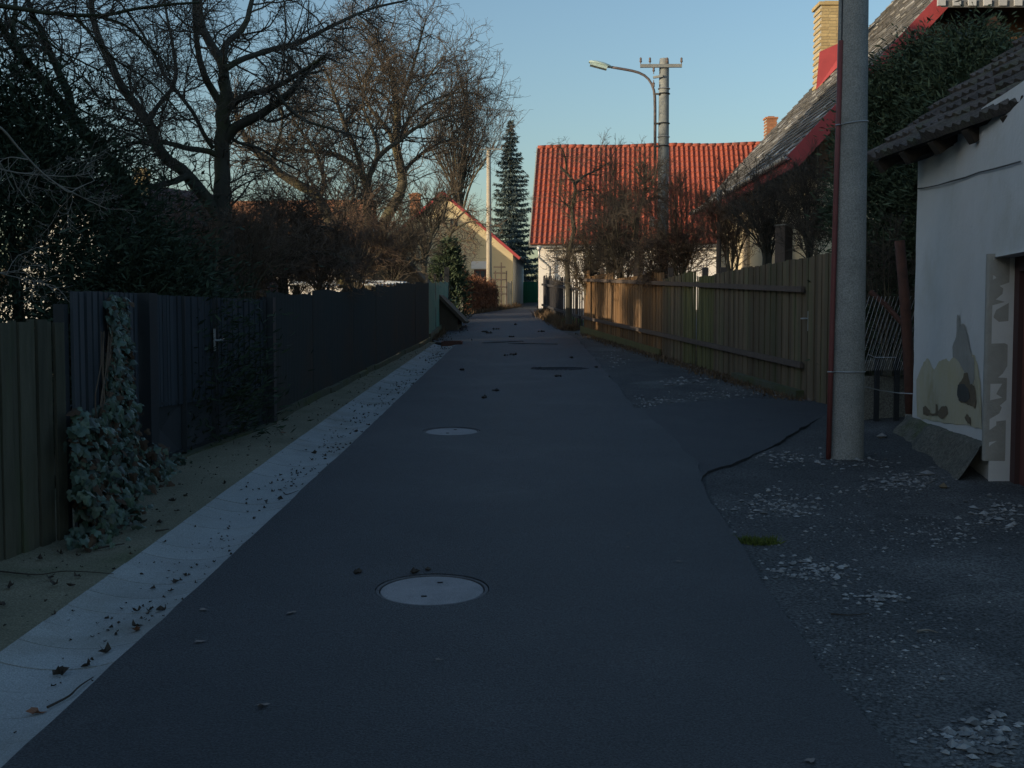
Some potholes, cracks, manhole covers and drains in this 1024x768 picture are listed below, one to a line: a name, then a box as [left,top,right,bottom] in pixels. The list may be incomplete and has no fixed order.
manhole cover [423,427,480,435]
manhole cover [376,575,488,606]
